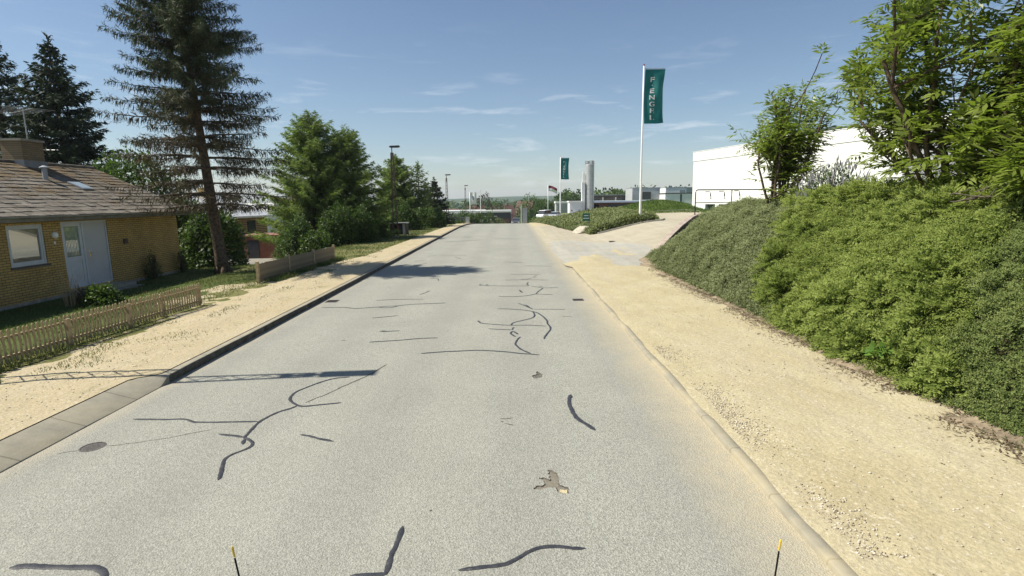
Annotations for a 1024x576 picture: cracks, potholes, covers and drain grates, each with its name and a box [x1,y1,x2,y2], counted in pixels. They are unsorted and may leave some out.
manhole cover [78,442,107,452]
pothole [534,470,569,494]
